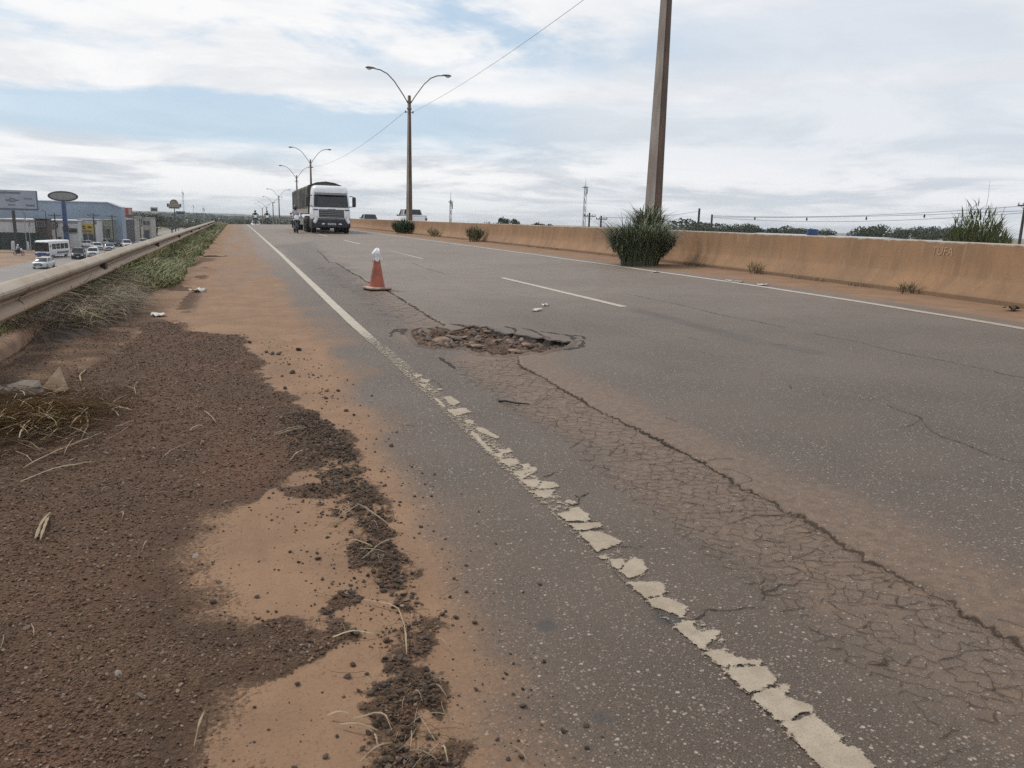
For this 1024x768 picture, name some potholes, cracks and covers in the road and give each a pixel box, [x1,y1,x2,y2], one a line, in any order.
crack [453,358,1024,763]
crack [319,252,468,336]
pothole [406,325,577,358]
